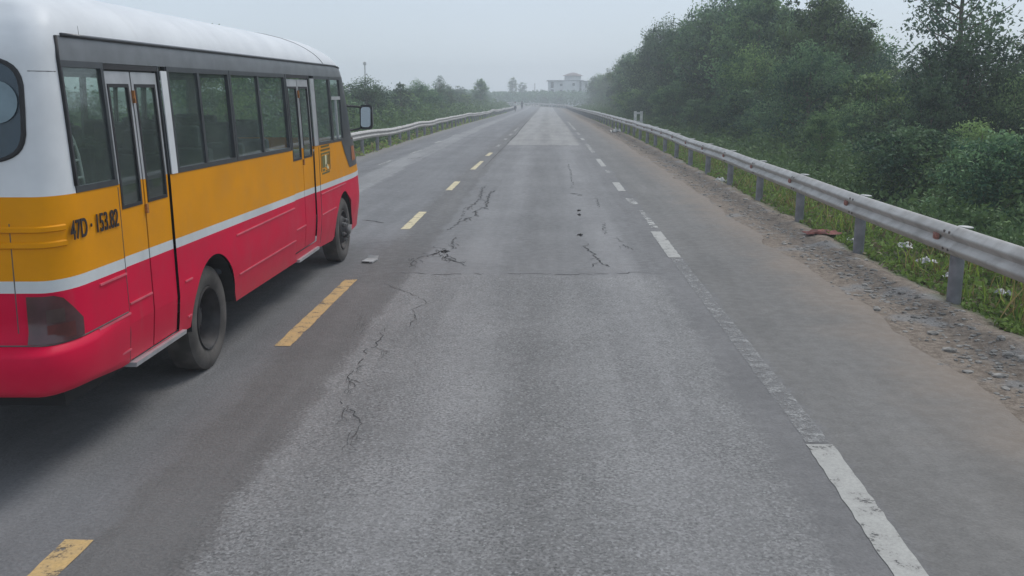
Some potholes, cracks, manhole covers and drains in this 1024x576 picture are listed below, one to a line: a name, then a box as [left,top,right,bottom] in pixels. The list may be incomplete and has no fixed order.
crack [337,313,390,449]
crack [387,187,647,325]
